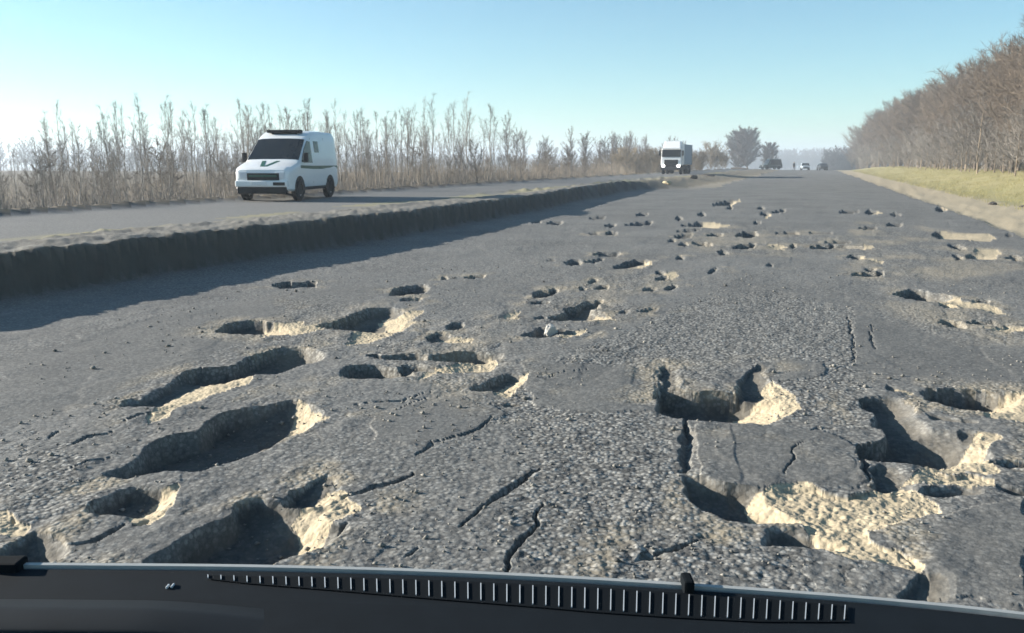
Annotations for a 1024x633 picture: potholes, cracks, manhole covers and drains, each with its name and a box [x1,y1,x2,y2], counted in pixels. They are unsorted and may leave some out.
pothole [143,489,362,565]
pothole [340,364,415,379]
pothole [102,398,329,480]
pothole [549,300,615,321]
pothole [848,253,883,264]
pothole [469,372,529,399]
pothole [867,463,917,497]
crack [459,468,544,573]
pothole [910,468,996,498]
pothole [894,289,1005,315]
pothole [767,243,796,251]
pothole [855,396,1002,476]
